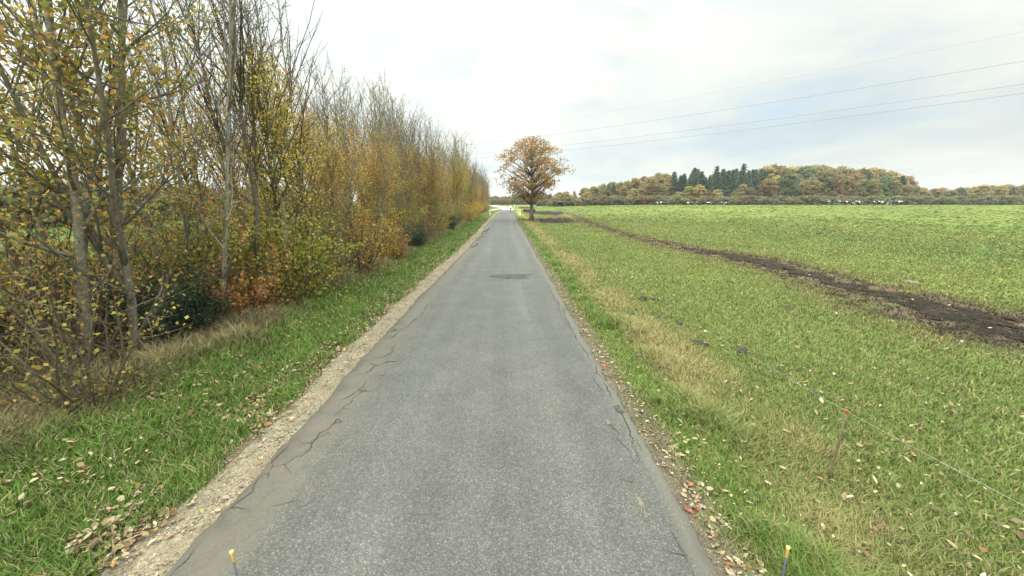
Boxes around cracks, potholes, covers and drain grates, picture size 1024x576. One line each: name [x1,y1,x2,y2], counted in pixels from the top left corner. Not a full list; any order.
crack [551,292,643,485]
crack [227,309,425,511]
